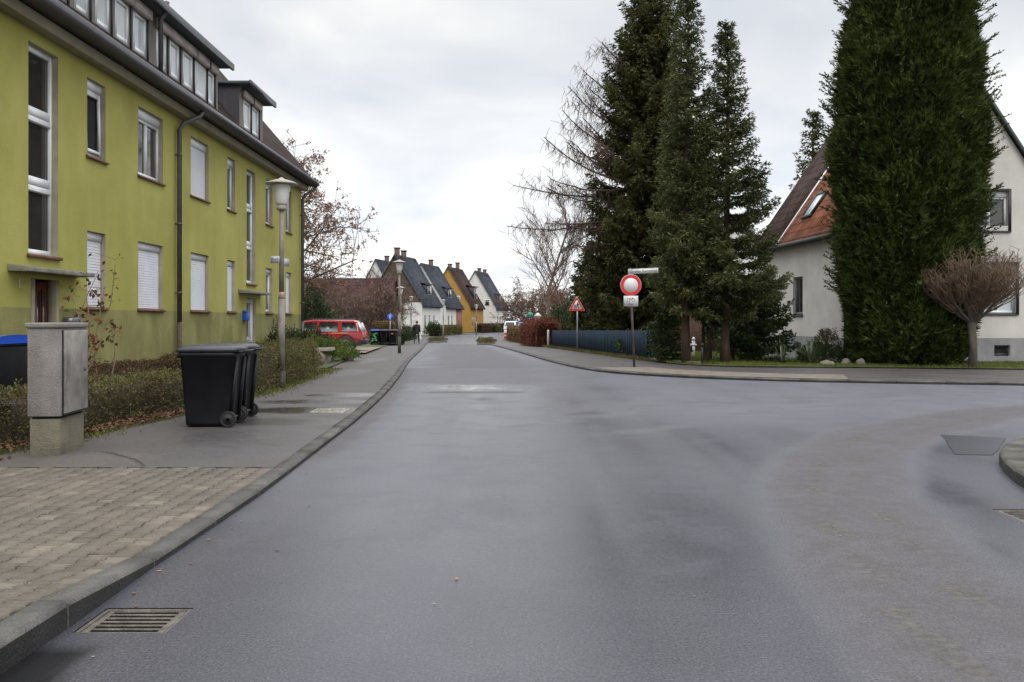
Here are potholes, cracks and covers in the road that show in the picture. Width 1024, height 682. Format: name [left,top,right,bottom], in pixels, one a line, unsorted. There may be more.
drain grate [73,608,193,633]
crack [93,451,146,466]
drain grate [993,509,1024,522]
